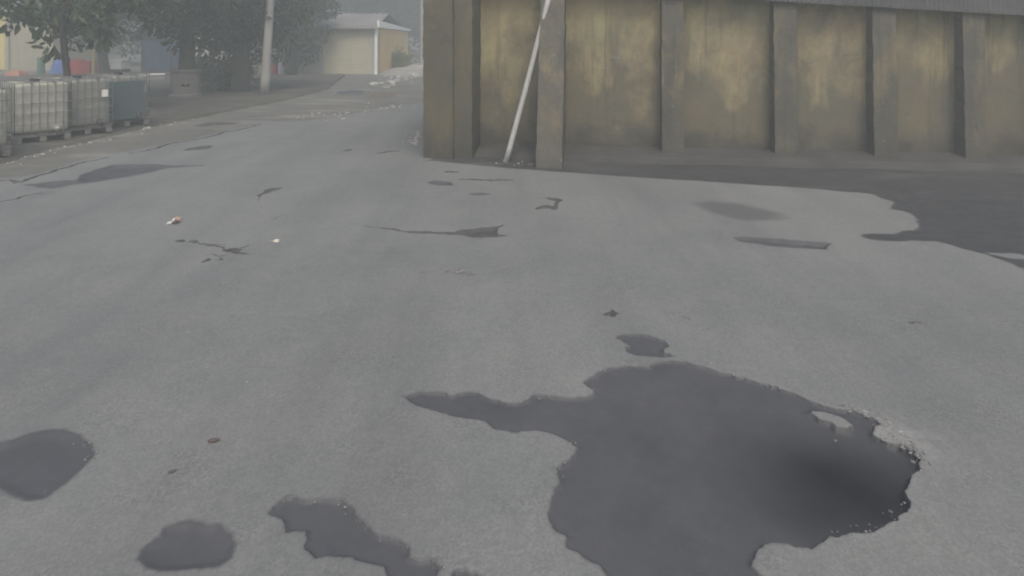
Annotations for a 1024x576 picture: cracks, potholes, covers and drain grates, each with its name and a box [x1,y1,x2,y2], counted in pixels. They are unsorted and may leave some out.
pothole [136,520,236,572]
pothole [405,360,922,576]
pothole [0,429,95,501]
pothole [268,496,442,576]
crack [366,224,507,238]
crack [535,197,563,210]
crack [257,187,283,221]
pothole [616,334,675,358]
crack [175,240,256,263]
